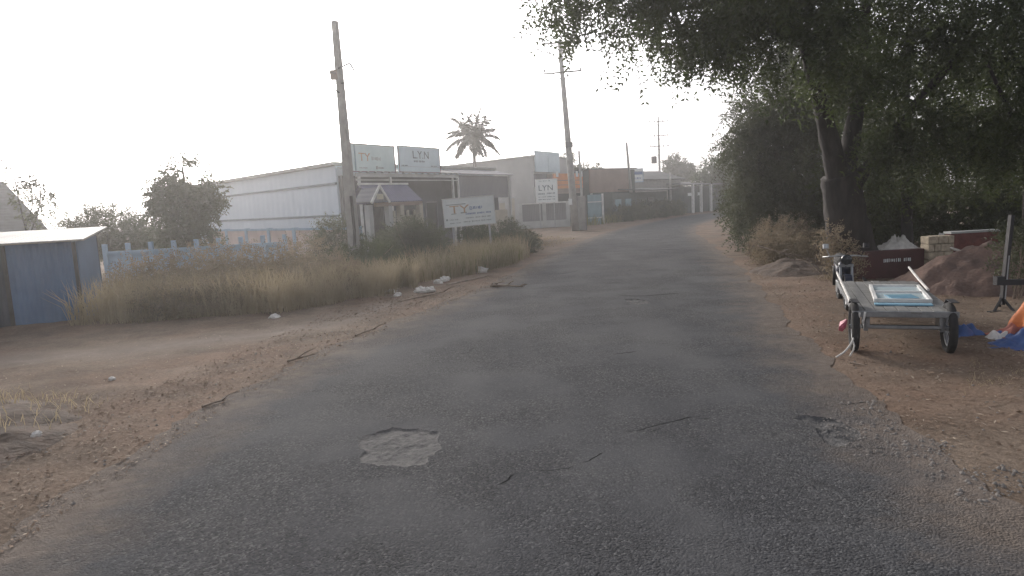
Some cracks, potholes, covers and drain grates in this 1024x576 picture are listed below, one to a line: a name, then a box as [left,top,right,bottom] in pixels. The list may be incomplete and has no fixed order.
crack [623,415,708,433]
crack [498,452,603,485]
pothole [794,415,861,447]
pothole [357,427,442,467]
